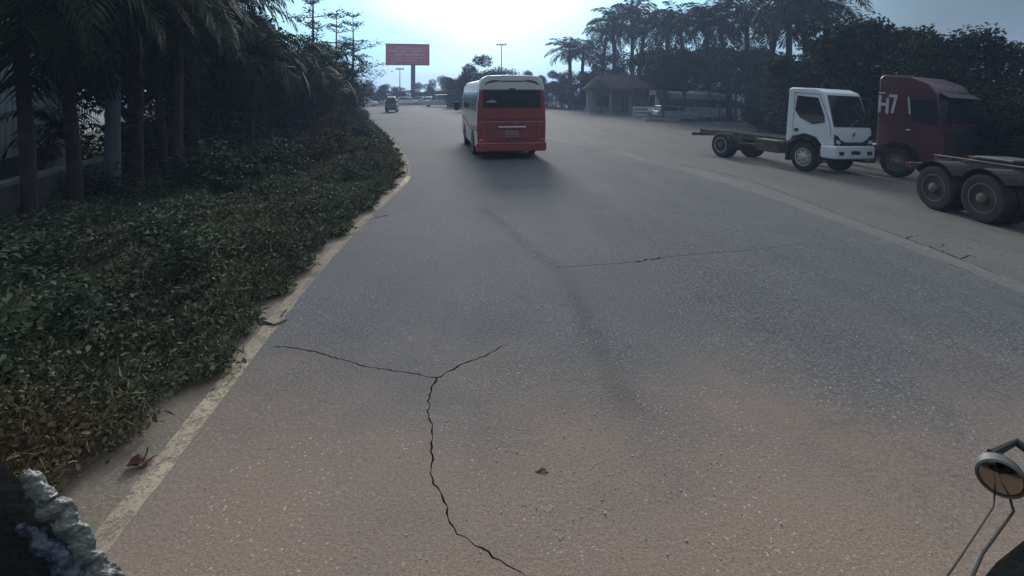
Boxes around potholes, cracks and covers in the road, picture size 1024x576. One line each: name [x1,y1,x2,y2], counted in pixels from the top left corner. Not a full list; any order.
crack [680,165,994,274]
crack [572,244,798,267]
crack [273,344,525,576]
